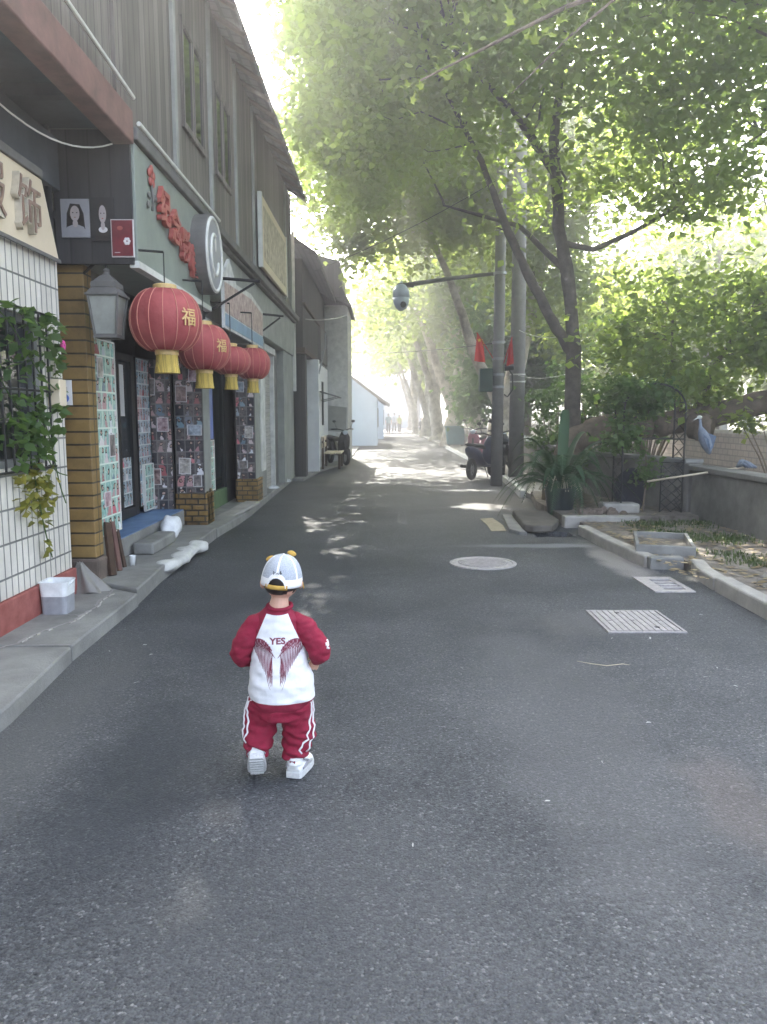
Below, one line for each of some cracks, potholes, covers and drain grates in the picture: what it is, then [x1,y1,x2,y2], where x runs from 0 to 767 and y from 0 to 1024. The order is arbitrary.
manhole cover [450,556,517,570]
drain grate [632,577,696,593]
